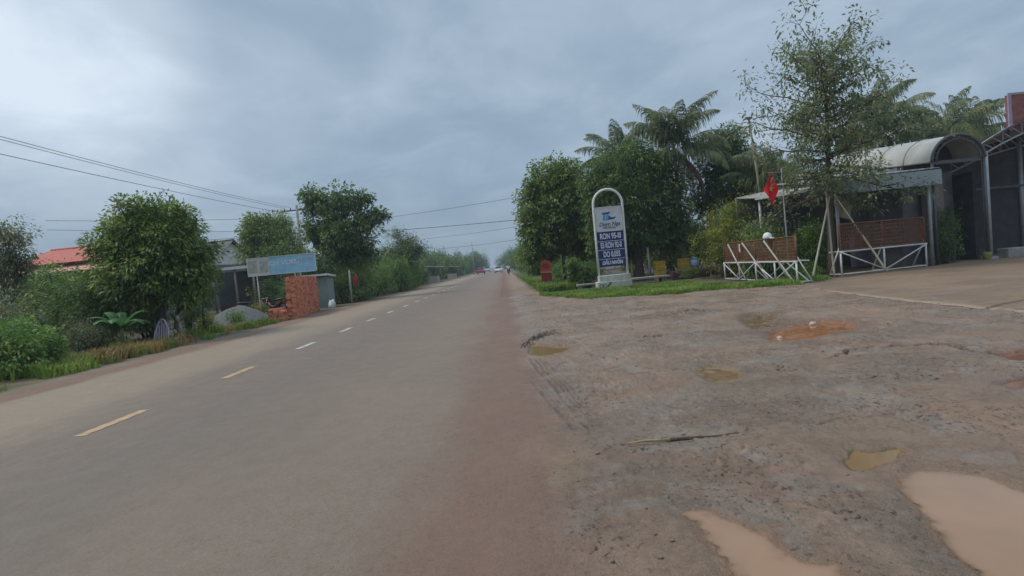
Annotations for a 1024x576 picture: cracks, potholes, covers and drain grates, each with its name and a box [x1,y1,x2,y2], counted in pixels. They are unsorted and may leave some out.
pothole [760,318,863,341]
pothole [525,341,577,356]
pothole [831,441,912,471]
pothole [881,461,1024,576]
pothole [688,362,751,383]
pothole [992,374,1024,388]
pothole [736,311,783,329]
pothole [667,501,872,576]
pothole [987,347,1024,360]
